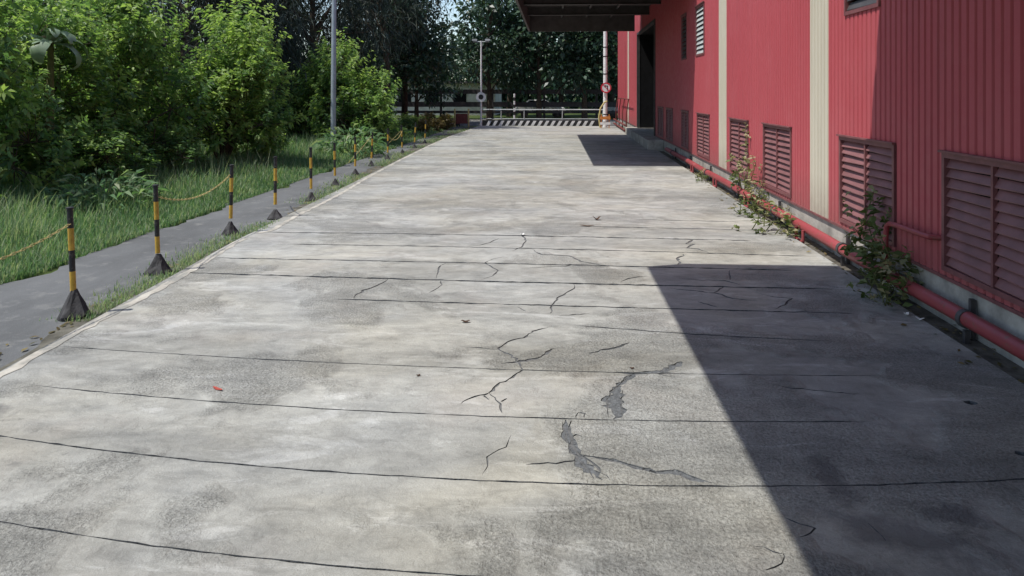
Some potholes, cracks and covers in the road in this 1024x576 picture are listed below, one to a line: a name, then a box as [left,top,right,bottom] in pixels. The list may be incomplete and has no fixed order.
crack [756,517,816,570]
crack [673,240,793,309]
crack [476,235,644,281]
crack [460,285,712,483]
